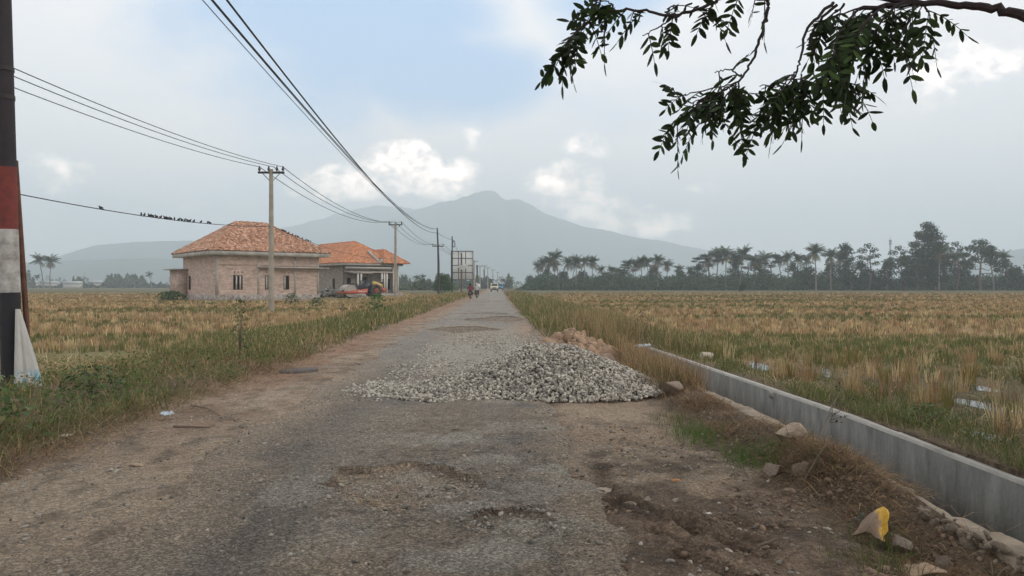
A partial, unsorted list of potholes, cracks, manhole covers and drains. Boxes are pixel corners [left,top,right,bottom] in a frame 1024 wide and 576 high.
pothole [309,460,499,517]
pothole [420,326,509,334]
pothole [461,504,567,541]
